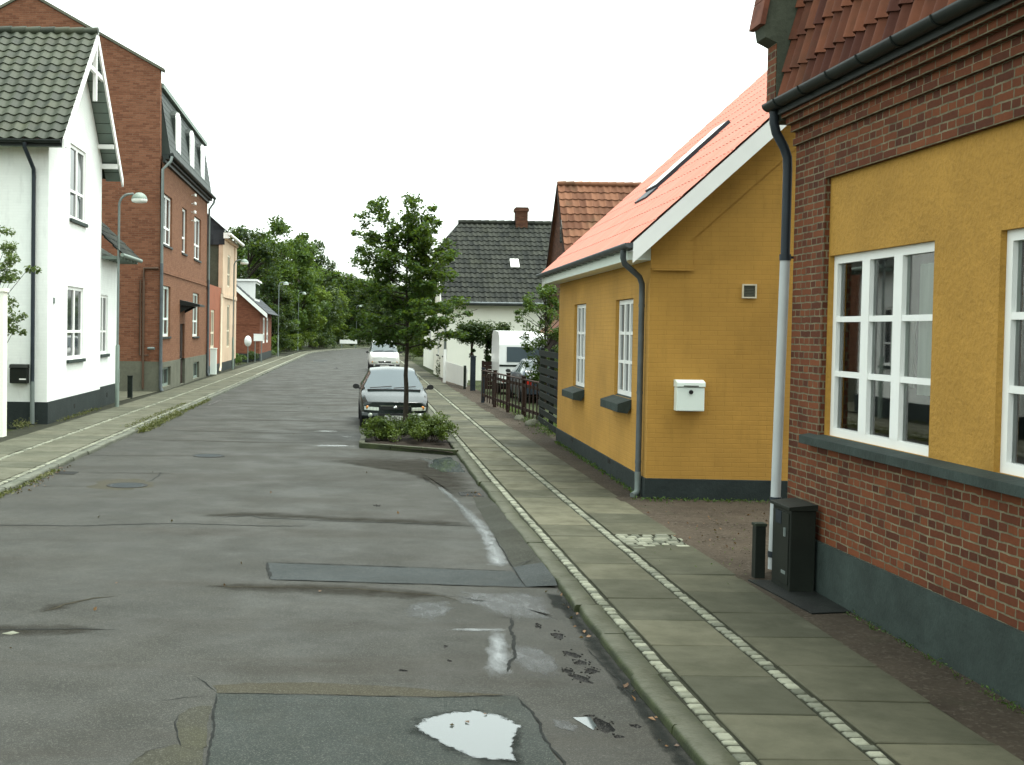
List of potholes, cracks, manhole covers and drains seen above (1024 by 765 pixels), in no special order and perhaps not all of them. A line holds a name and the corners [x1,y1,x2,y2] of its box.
pothole [568,671,593,684]
crack [136,678,215,759]
pothole [593,716,615,735]
crack [518,697,566,765]
